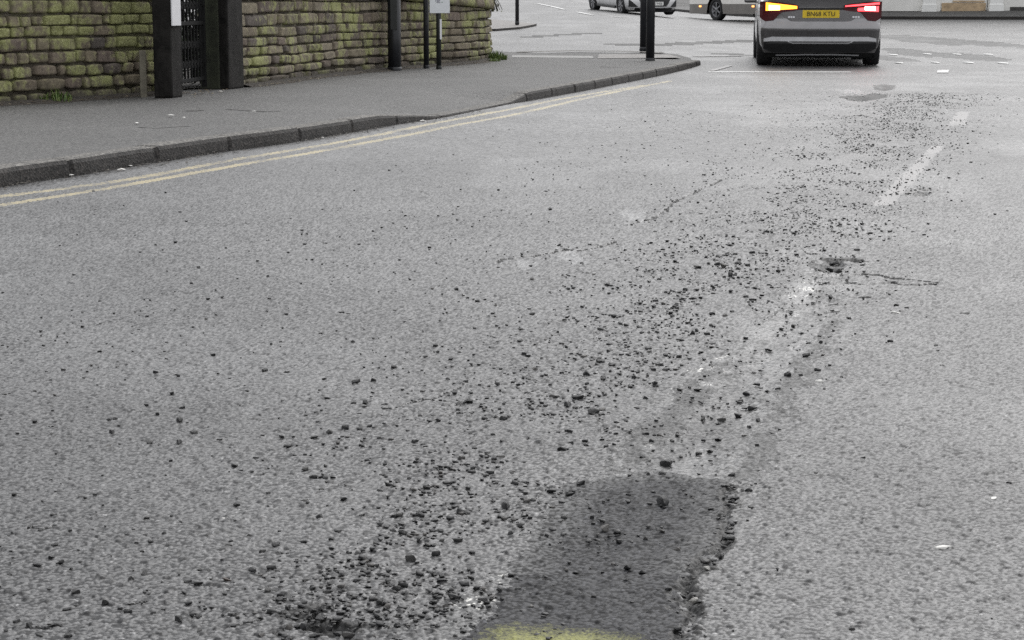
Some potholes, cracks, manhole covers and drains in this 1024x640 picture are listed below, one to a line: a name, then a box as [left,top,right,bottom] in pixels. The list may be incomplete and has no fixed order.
pothole [632,261,860,479]
pothole [806,257,868,273]
crack [817,273,938,298]
